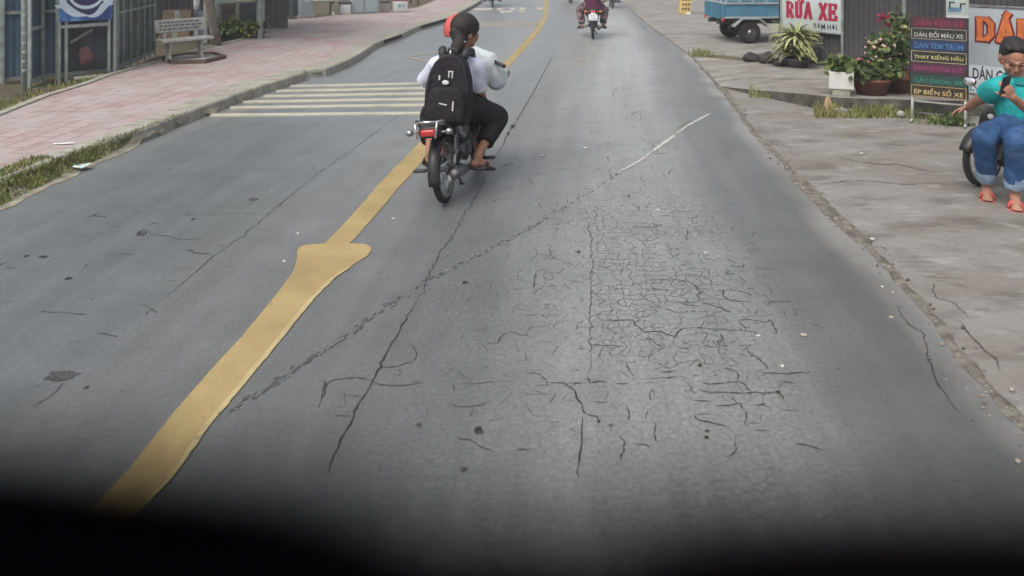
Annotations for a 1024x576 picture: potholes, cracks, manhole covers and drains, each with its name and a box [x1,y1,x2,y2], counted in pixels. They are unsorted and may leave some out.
crack [89,211,209,281]
crack [818,158,938,184]
crack [608,264,812,456]
pothole [44,371,82,381]
crack [897,305,975,421]
crack [525,362,656,463]
crack [318,178,485,454]
